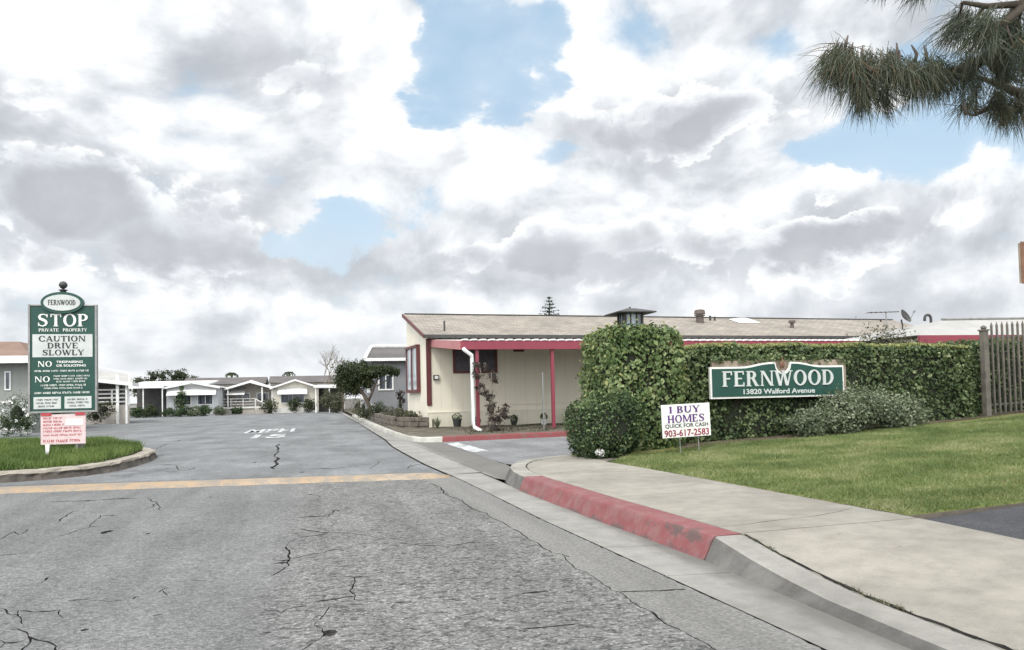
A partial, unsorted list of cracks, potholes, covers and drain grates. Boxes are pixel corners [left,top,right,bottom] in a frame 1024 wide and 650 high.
crack [0,594,140,650]
crack [270,444,280,469]
crack [272,494,380,576]
crack [268,576,376,650]
crack [54,498,129,536]
